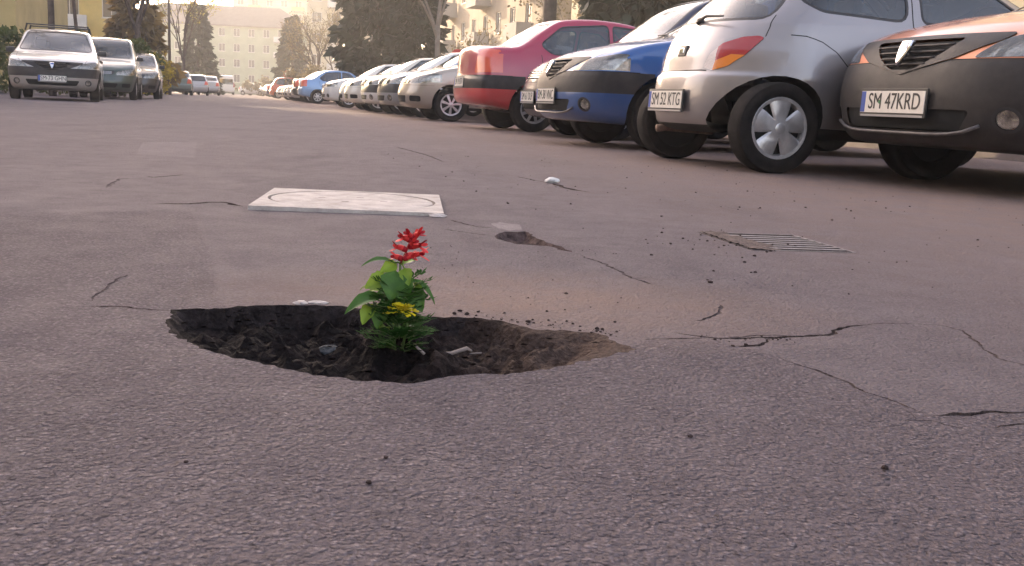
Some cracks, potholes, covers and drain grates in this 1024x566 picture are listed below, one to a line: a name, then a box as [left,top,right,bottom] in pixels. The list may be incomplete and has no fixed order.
drain grate [699,231,857,253]
crack [92,274,169,311]
manhole cover [247,188,444,216]
crack [904,410,1024,430]
pothole [165,305,638,384]
crack [583,256,654,285]
crack [646,305,1024,365]
pothole [495,231,572,252]
